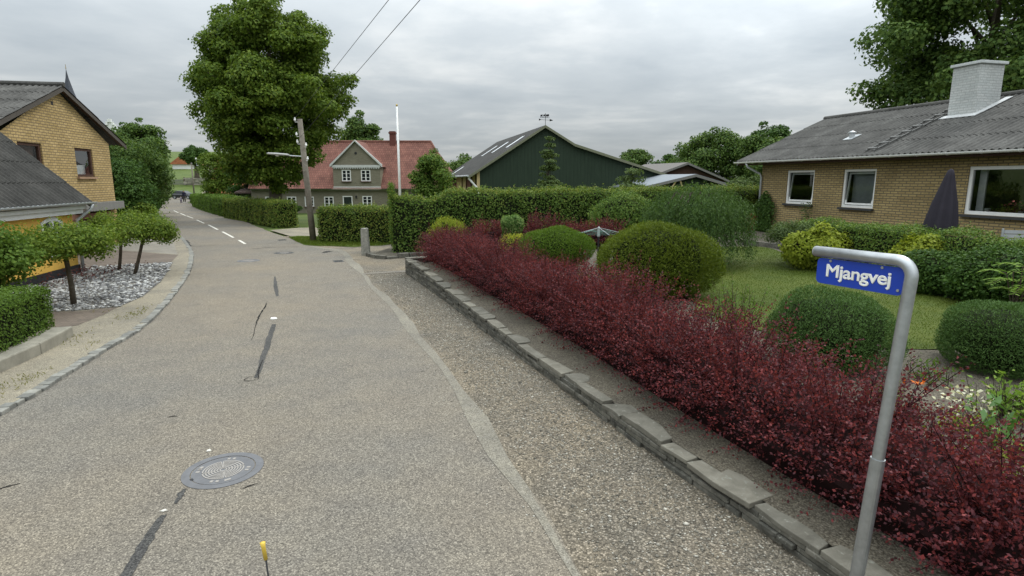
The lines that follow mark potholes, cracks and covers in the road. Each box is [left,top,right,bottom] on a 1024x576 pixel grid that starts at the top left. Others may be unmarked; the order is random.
manhole cover [181,452,264,489]
